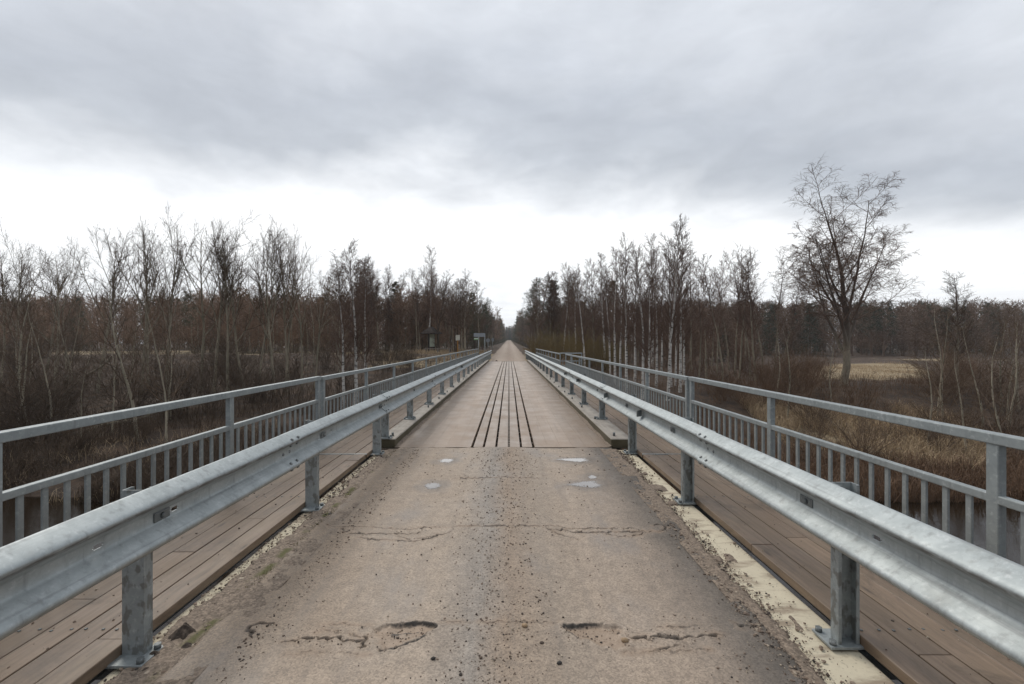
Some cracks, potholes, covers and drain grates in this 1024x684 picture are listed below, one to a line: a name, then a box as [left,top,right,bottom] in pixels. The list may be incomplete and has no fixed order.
crack [434,614,566,628]
crack [326,524,457,545]
pothole [368,618,441,653]
crack [235,618,379,664]
crack [541,522,673,543]
crack [615,618,763,659]
